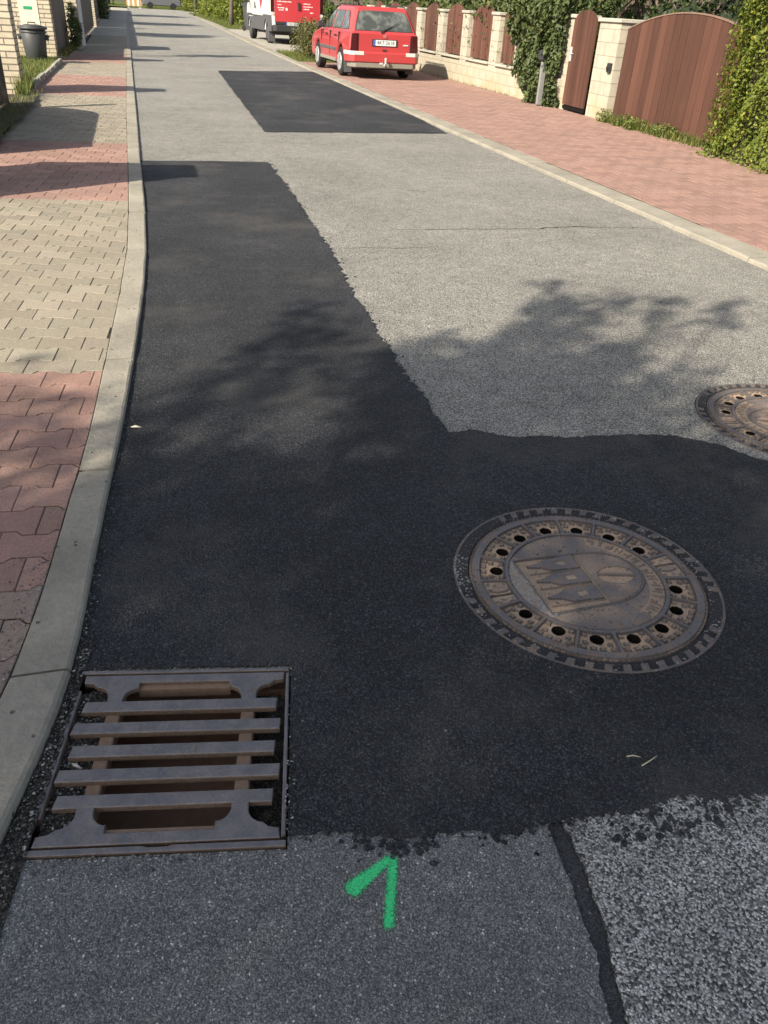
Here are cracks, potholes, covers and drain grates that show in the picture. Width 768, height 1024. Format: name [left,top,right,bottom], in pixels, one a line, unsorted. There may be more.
manhole cover [695,383,768,454]
crack [361,226,653,249]
drain grate [23,667,290,861]
manhole cover [453,507,726,674]
